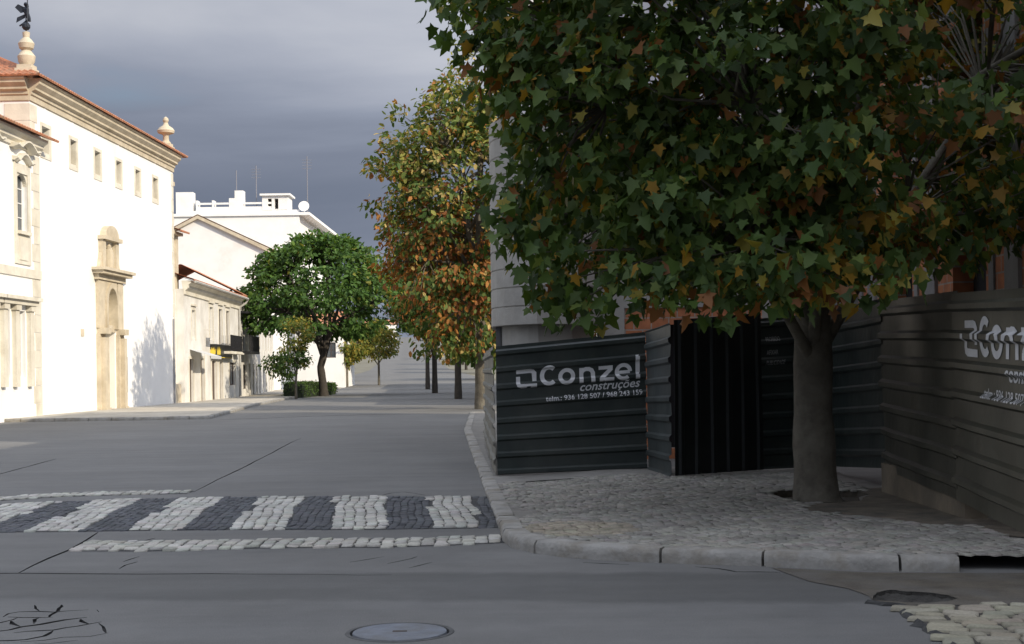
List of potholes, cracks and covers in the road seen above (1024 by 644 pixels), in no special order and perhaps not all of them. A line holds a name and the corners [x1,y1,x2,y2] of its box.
pothole [873,591,956,603]
manhole cover [345,622,454,643]
crack [0,605,107,644]
